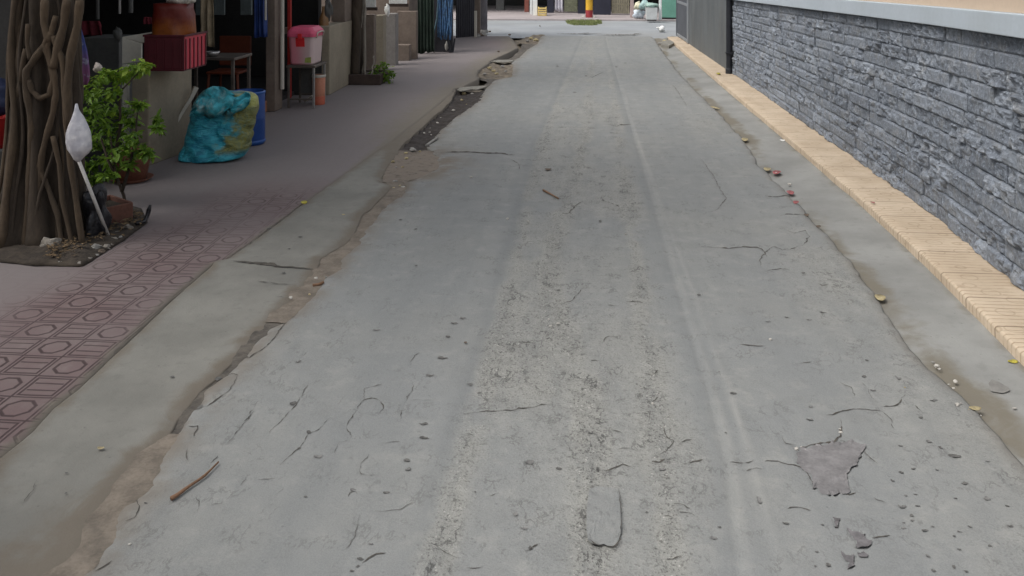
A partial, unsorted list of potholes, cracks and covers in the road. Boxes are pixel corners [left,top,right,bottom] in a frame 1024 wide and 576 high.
pothole [382,88,486,183]
pothole [514,34,545,44]
pothole [477,62,513,79]
crack [714,195,810,271]
crack [732,384,921,481]
crack [171,182,407,494]
crack [452,151,520,168]
